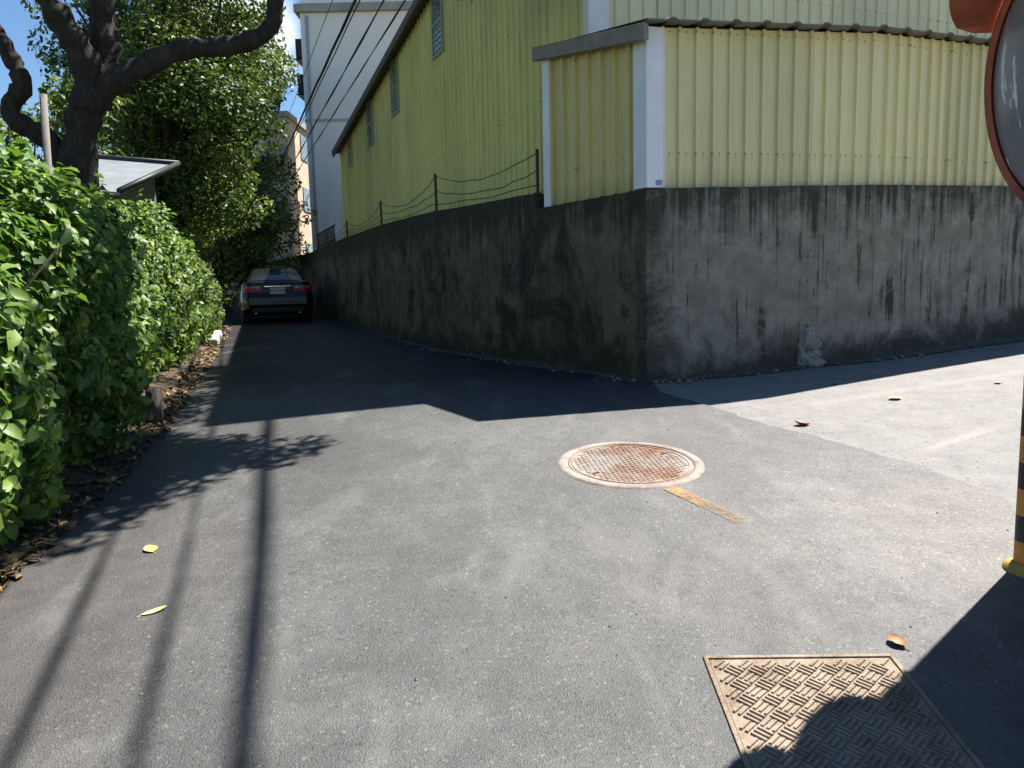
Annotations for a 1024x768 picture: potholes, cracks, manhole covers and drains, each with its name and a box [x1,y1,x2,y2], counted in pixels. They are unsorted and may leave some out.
manhole cover [703,654,986,768]
manhole cover [557,442,705,490]
